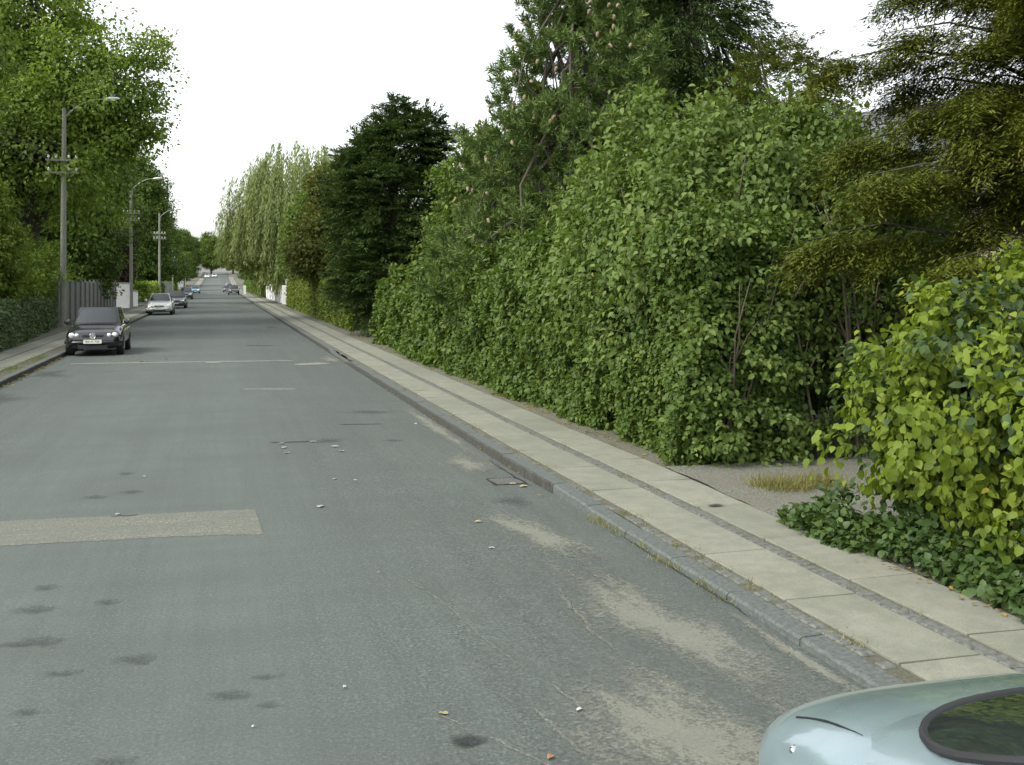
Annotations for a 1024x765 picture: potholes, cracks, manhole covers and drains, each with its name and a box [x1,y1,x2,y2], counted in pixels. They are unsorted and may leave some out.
crack [559,589,614,649]
drain grate [486,477,526,485]
crack [400,575,515,663]
crack [490,684,595,765]
